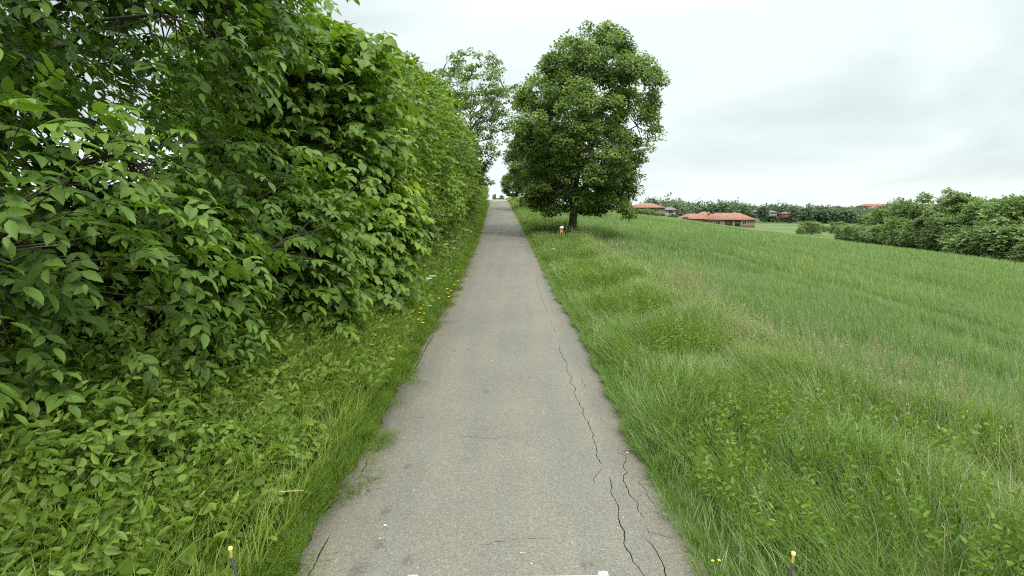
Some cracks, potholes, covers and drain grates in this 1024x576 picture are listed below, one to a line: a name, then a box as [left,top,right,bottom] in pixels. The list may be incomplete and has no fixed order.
crack [559,348,679,576]
